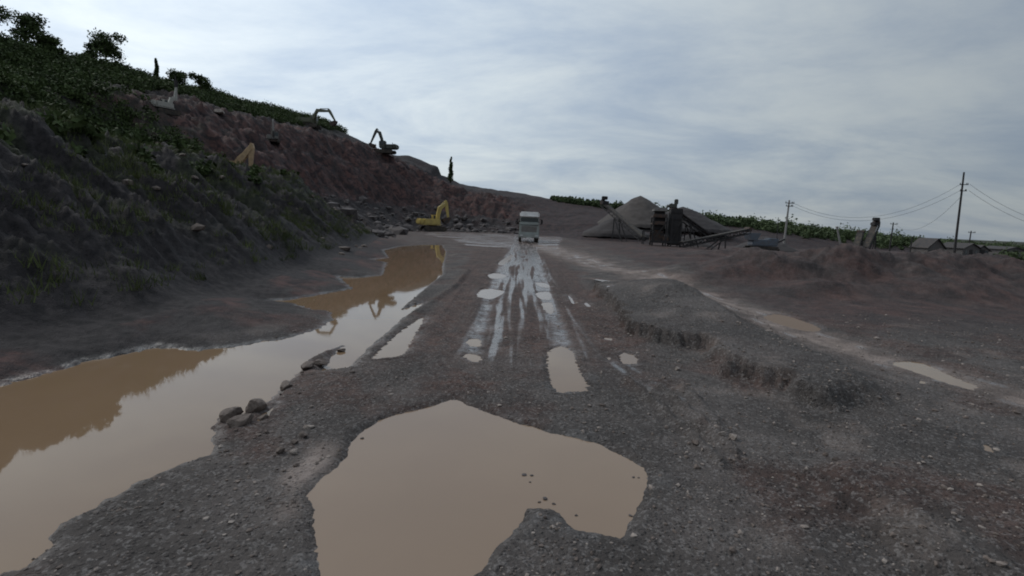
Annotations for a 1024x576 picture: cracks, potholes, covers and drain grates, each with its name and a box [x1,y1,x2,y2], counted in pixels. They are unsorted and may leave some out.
pothole [363,315,431,361]
pothole [287,391,673,576]
pothole [757,312,830,333]
pothole [612,350,647,367]
pothole [881,357,990,392]
pothole [536,343,600,396]
